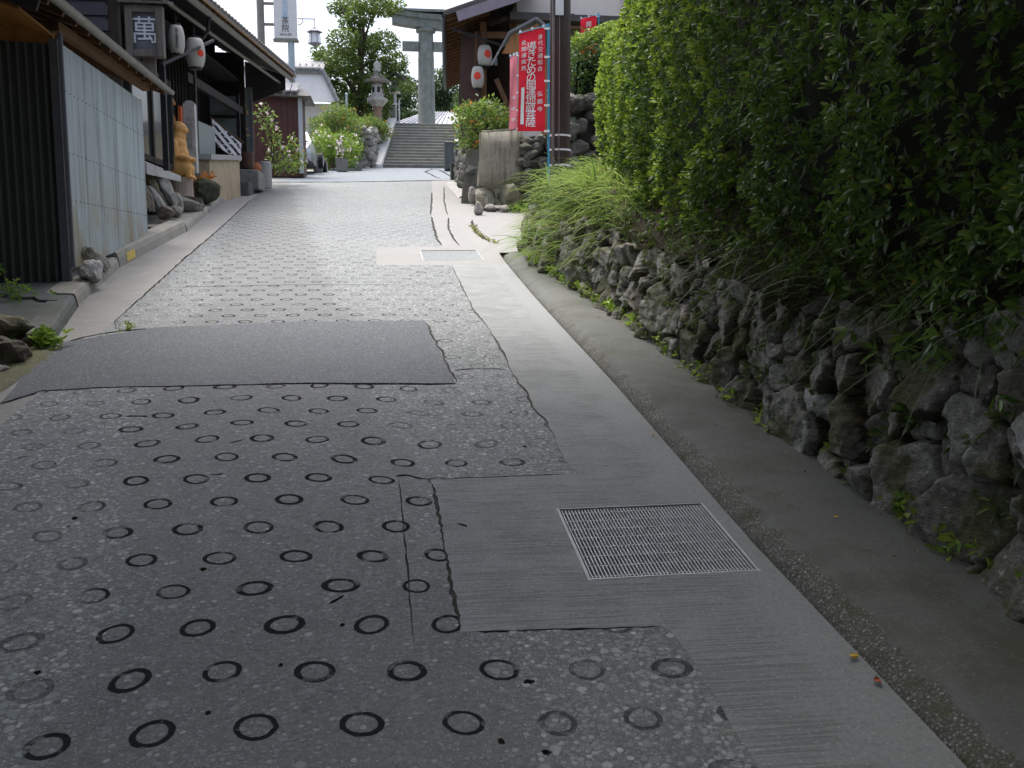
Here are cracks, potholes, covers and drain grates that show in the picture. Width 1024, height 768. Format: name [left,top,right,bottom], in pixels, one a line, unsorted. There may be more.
crack [424,169,492,246]
crack [344,269,661,642]
drain grate [420,250,484,260]
drain grate [556,502,761,580]
